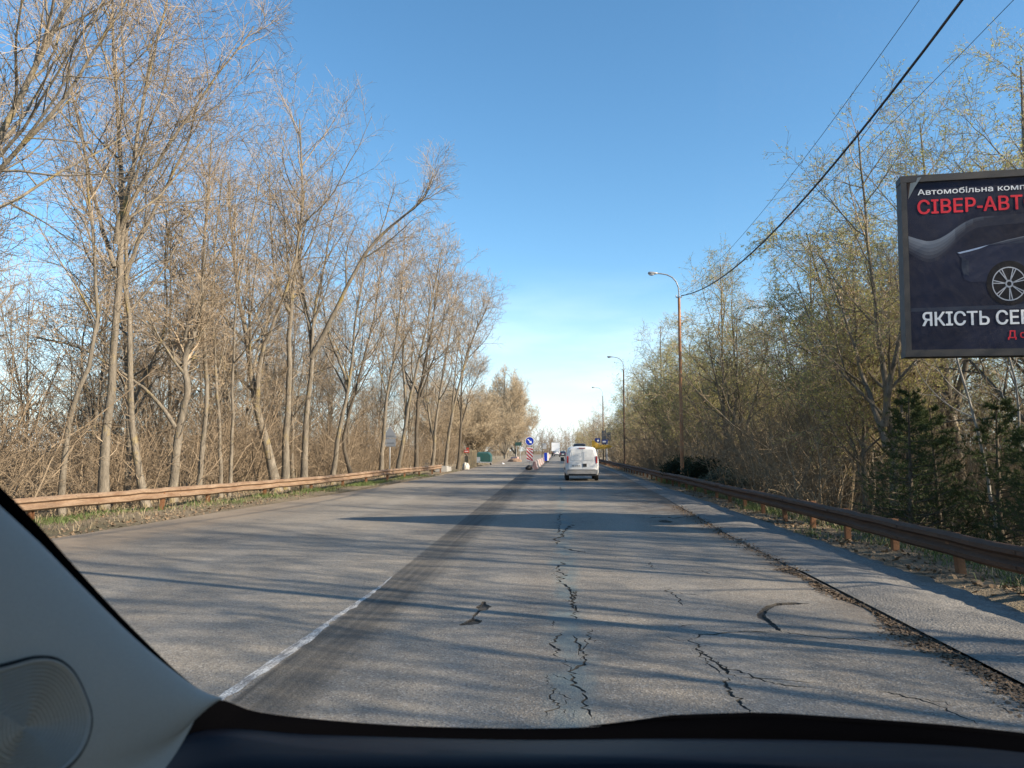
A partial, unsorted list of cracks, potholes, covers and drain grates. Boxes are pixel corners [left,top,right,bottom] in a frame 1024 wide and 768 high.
crack [667,570,1024,722]
crack [544,512,596,717]
